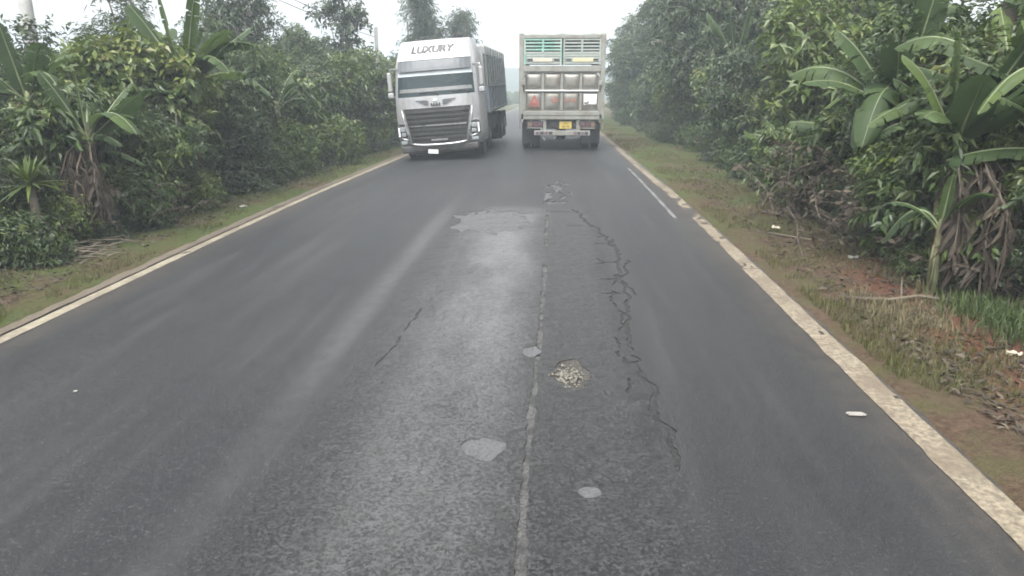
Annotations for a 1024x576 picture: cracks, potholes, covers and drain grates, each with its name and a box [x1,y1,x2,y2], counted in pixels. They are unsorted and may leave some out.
pothole [548,359,592,391]
crack [556,209,681,472]
pothole [543,180,574,205]
crack [375,308,422,366]
